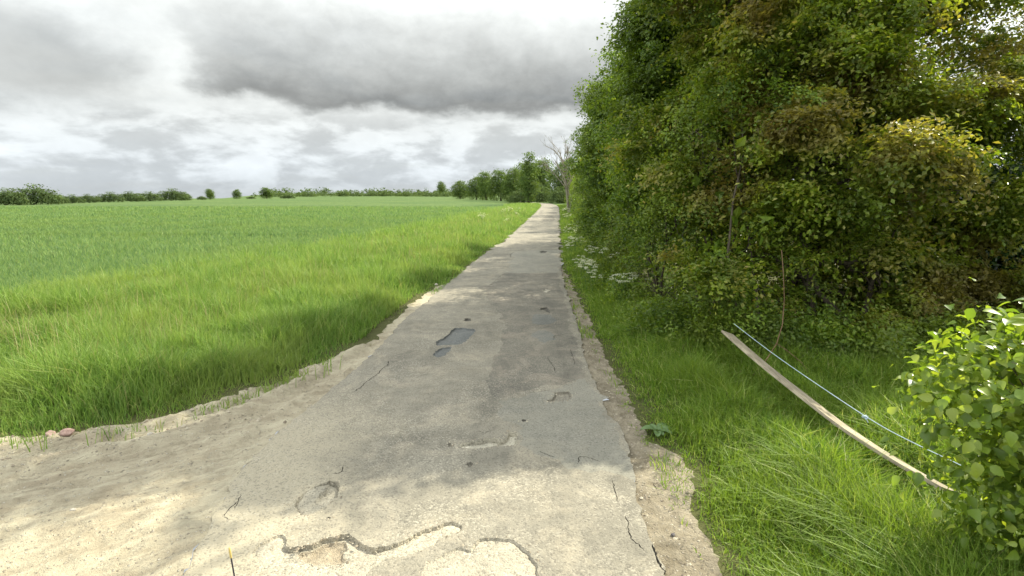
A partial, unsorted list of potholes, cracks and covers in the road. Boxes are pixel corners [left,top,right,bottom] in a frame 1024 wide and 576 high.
pothole [294,480,340,516]
crack [610,481,666,574]
pothole [433,347,452,357]
pothole [436,328,476,346]
pothole [459,432,519,449]
pothole [547,391,572,402]
